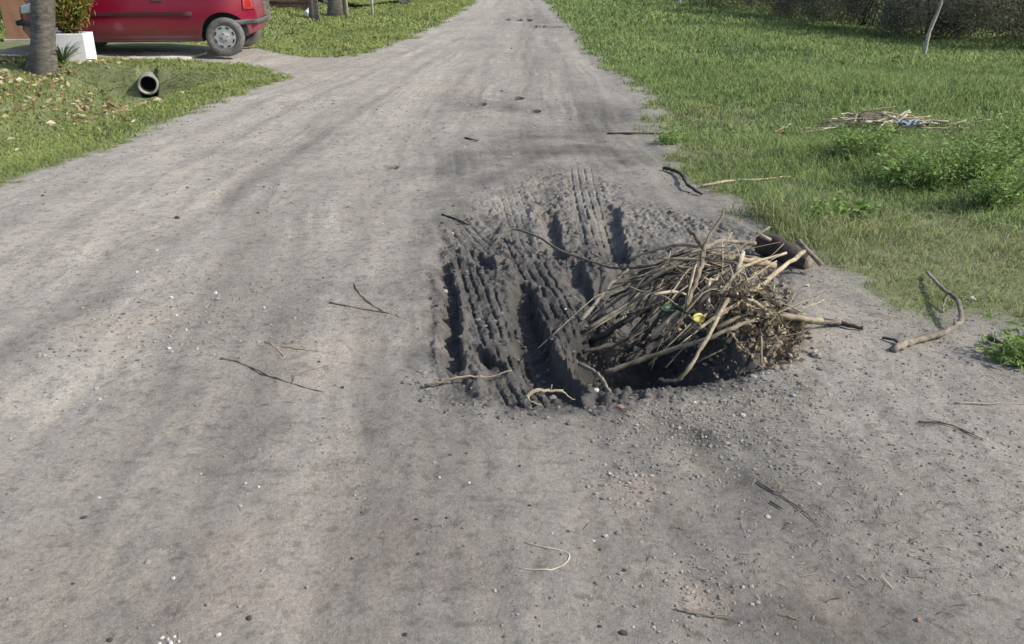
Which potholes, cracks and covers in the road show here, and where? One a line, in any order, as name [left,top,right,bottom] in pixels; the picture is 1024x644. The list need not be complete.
pothole [407,160,821,422]
